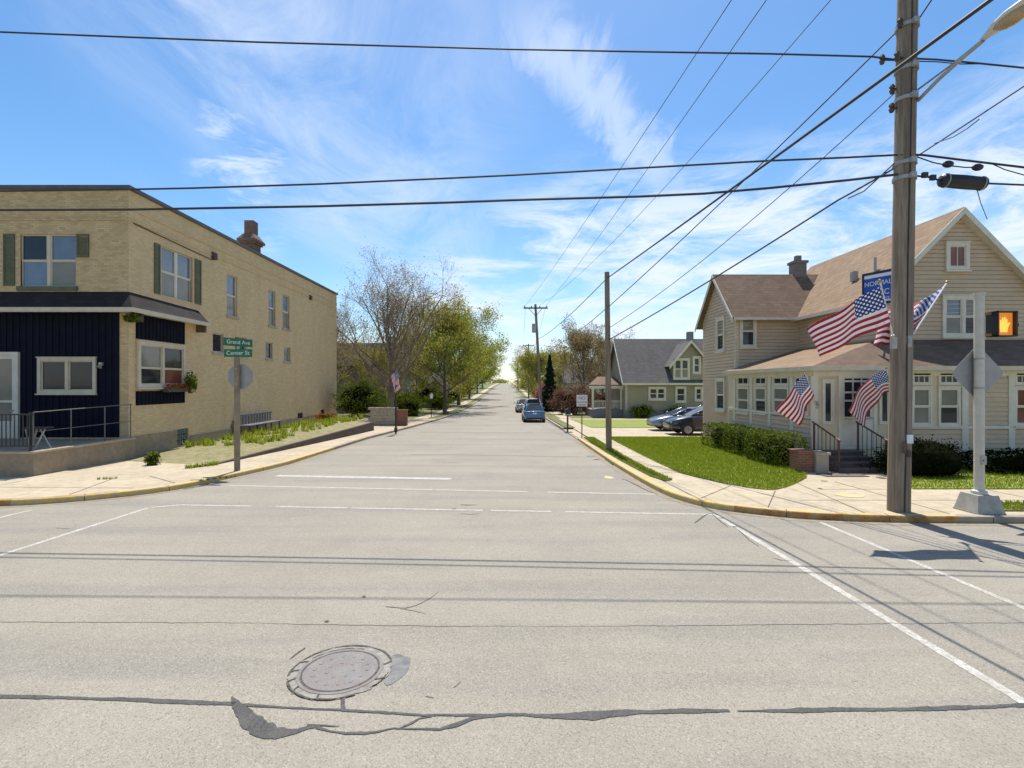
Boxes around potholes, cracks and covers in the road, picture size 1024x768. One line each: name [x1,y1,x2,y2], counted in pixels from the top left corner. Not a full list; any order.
manhole cover [286,645,393,700]
crack [385,594,435,613]
